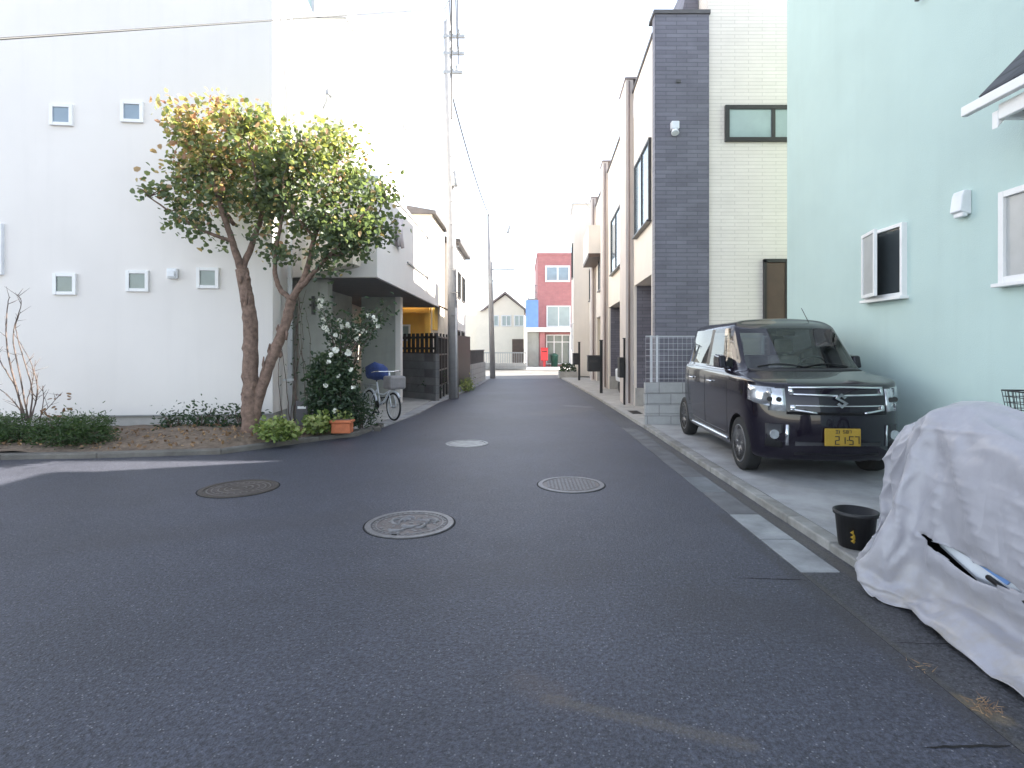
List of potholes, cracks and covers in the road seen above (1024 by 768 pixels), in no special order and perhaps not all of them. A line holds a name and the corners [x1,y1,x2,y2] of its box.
manhole cover [537,476,606,494]
manhole cover [195,479,280,499]
manhole cover [362,510,456,539]
manhole cover [446,440,488,448]
